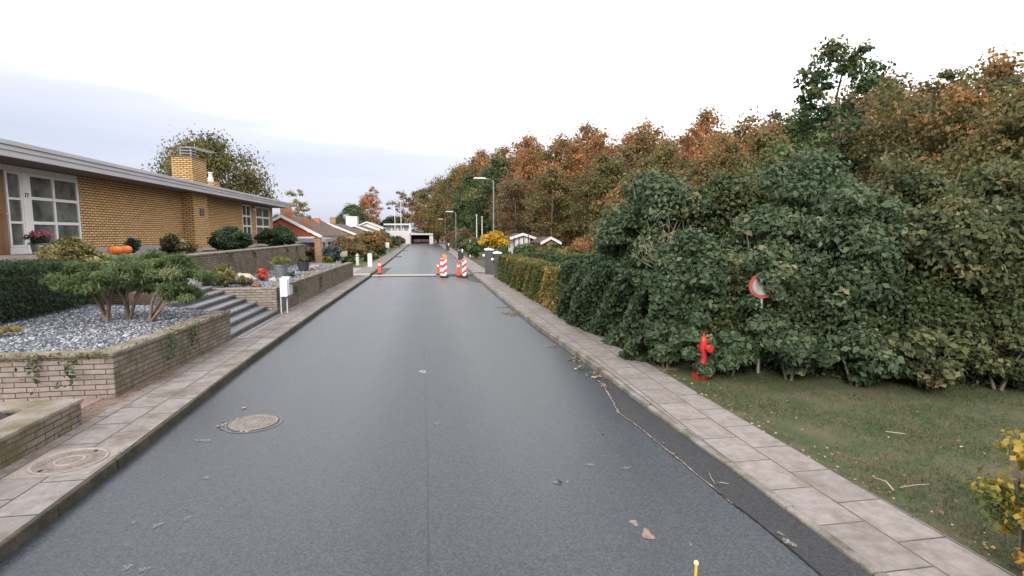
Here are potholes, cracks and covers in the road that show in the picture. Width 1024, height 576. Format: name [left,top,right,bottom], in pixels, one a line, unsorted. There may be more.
manhole cover [216,413,284,433]
crack [598,380,823,576]
manhole cover [1,445,128,480]
